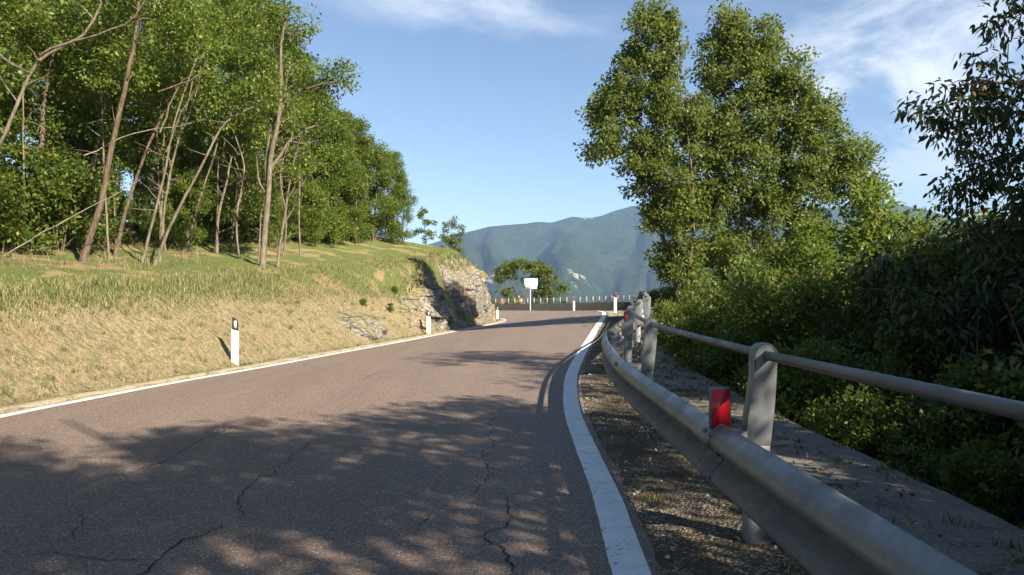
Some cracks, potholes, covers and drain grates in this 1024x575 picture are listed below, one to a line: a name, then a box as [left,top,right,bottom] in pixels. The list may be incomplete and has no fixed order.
crack [471,412,503,495]
crack [477,495,519,575]
crack [28,441,311,575]
